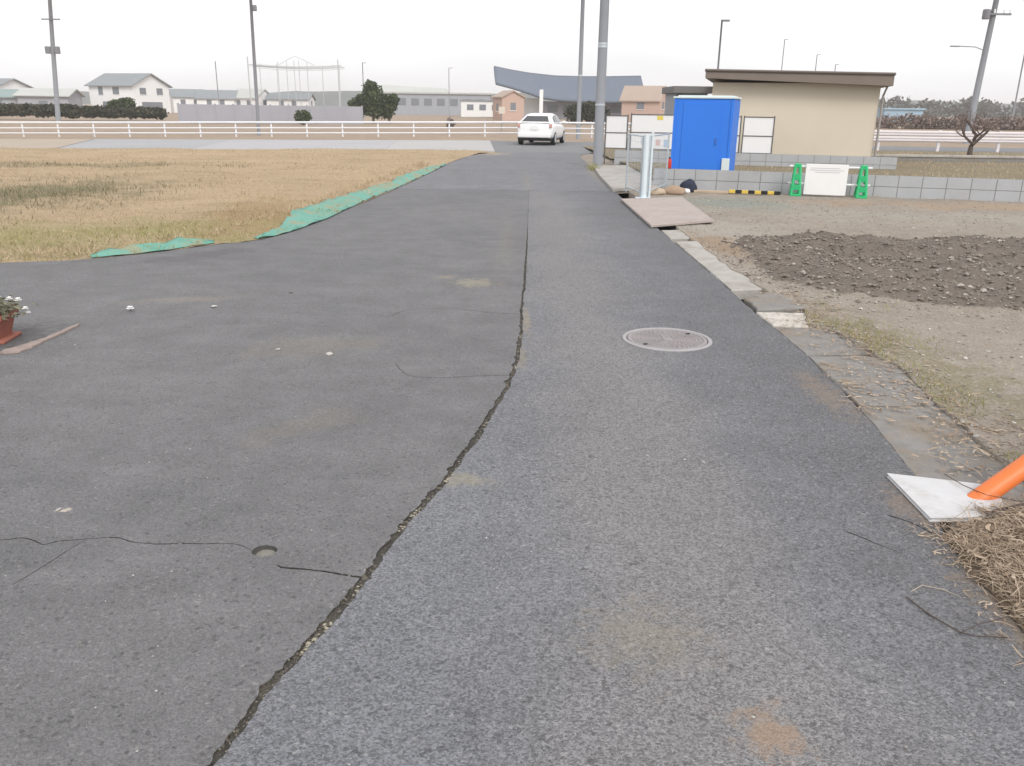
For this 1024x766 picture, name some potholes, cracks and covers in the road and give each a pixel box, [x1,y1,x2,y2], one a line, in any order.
pothole [252,545,278,557]
crack [5,194,529,766]
manhole cover [622,327,713,352]
